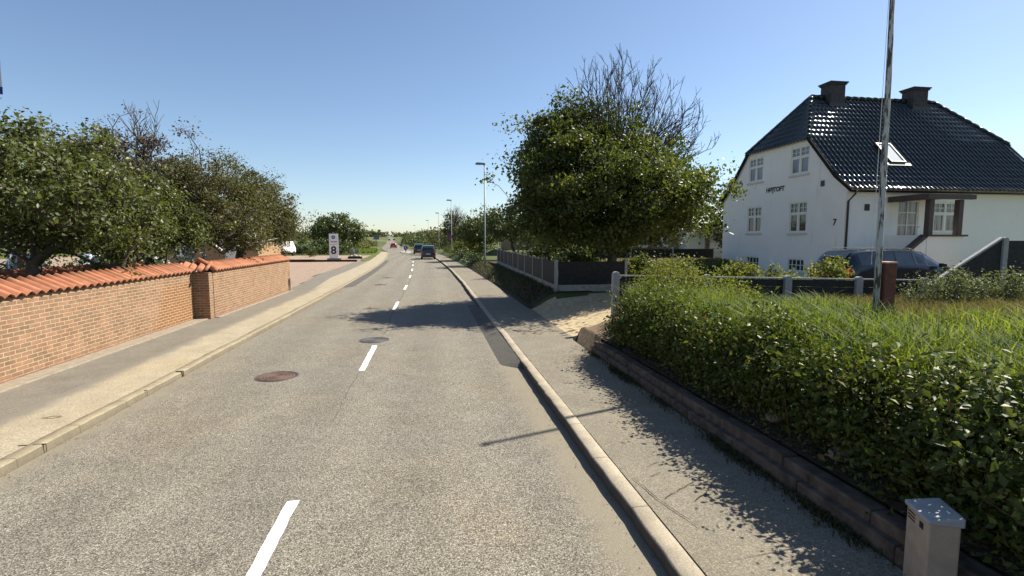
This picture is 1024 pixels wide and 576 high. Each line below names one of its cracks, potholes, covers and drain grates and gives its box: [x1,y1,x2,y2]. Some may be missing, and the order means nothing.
manhole cover [254,371,299,382]
crack [632,462,711,526]
